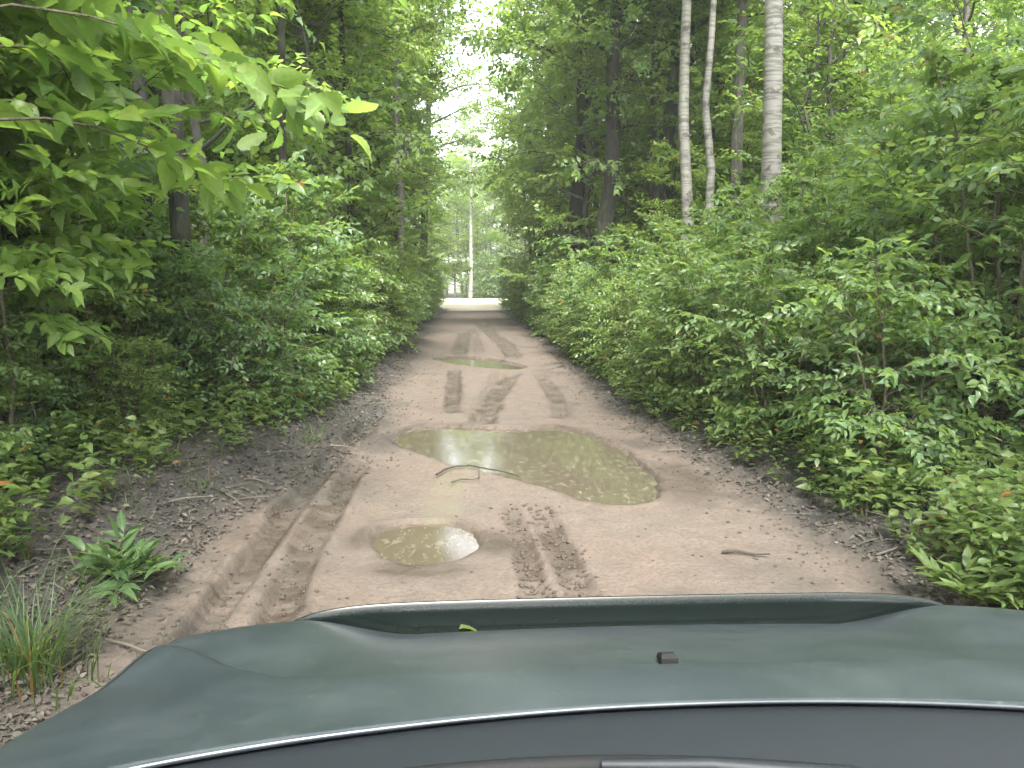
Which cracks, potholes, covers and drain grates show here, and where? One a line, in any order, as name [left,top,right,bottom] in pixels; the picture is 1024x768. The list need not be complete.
pothole [383,423,668,506]
pothole [362,517,492,567]
pothole [429,356,529,370]
